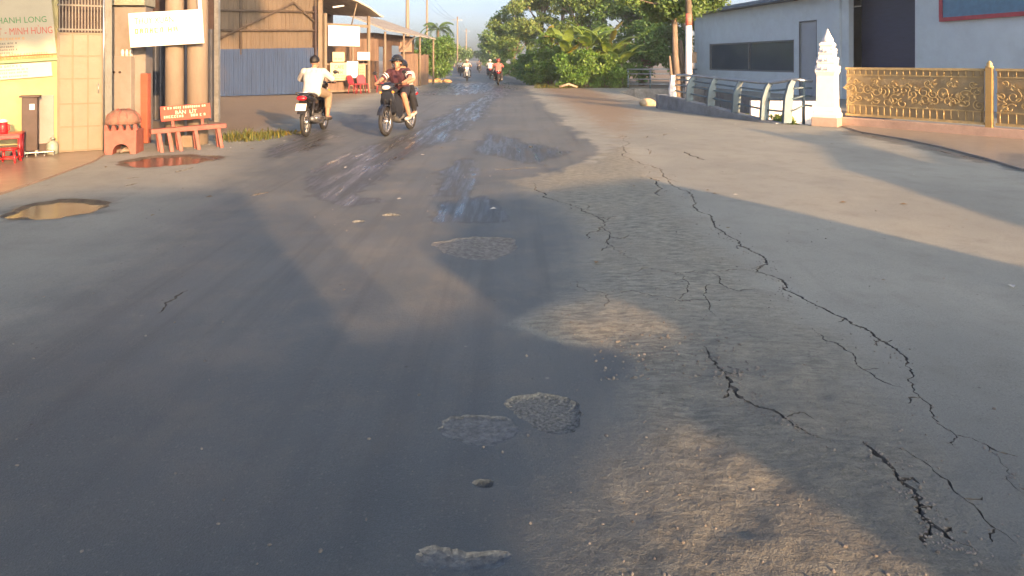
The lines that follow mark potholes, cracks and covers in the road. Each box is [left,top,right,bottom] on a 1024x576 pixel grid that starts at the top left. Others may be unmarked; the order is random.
crack [863,441,1013,552]
pothole [115,154,225,168]
crack [577,133,1021,492]
pothole [0,198,112,220]
